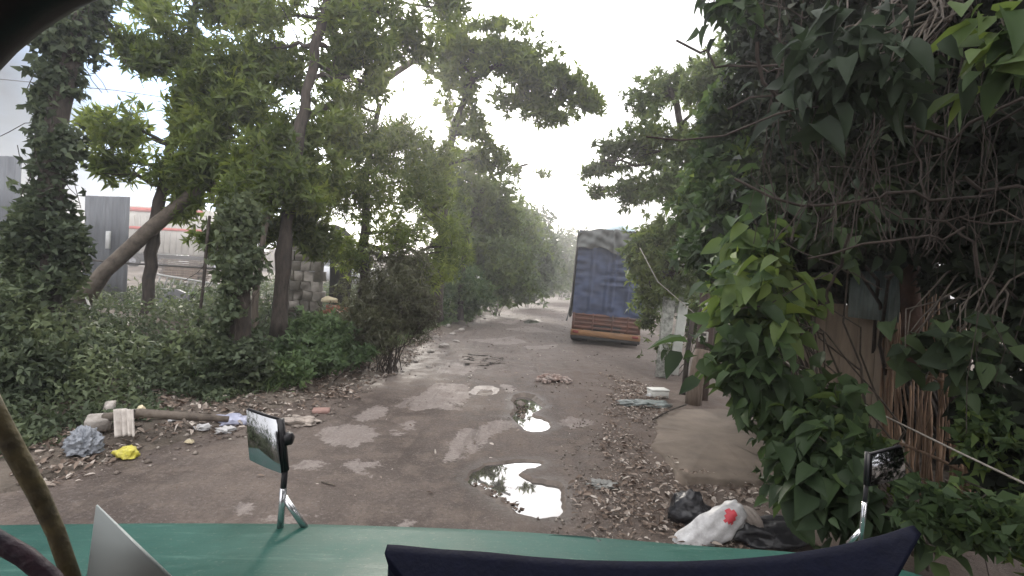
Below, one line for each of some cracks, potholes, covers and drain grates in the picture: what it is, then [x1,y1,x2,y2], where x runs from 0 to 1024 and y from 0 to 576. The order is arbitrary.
pothole [509,392,553,432]
pothole [464,459,567,519]
